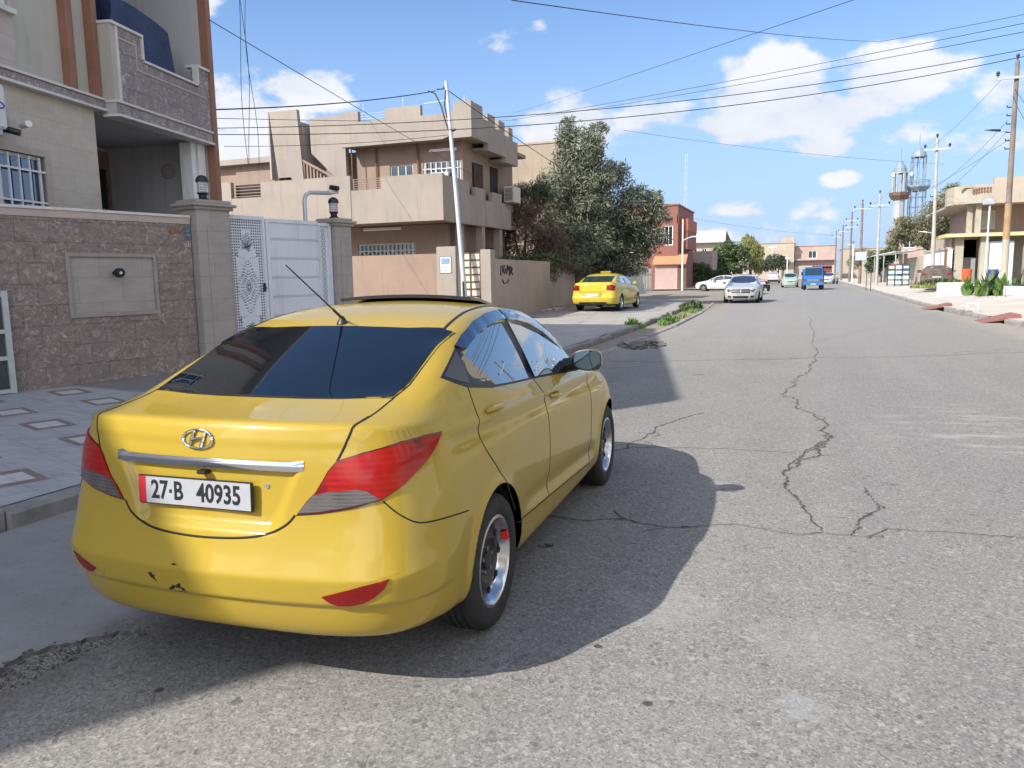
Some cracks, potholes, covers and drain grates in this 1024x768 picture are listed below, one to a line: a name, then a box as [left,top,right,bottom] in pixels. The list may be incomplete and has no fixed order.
crack [548,317,1024,539]
